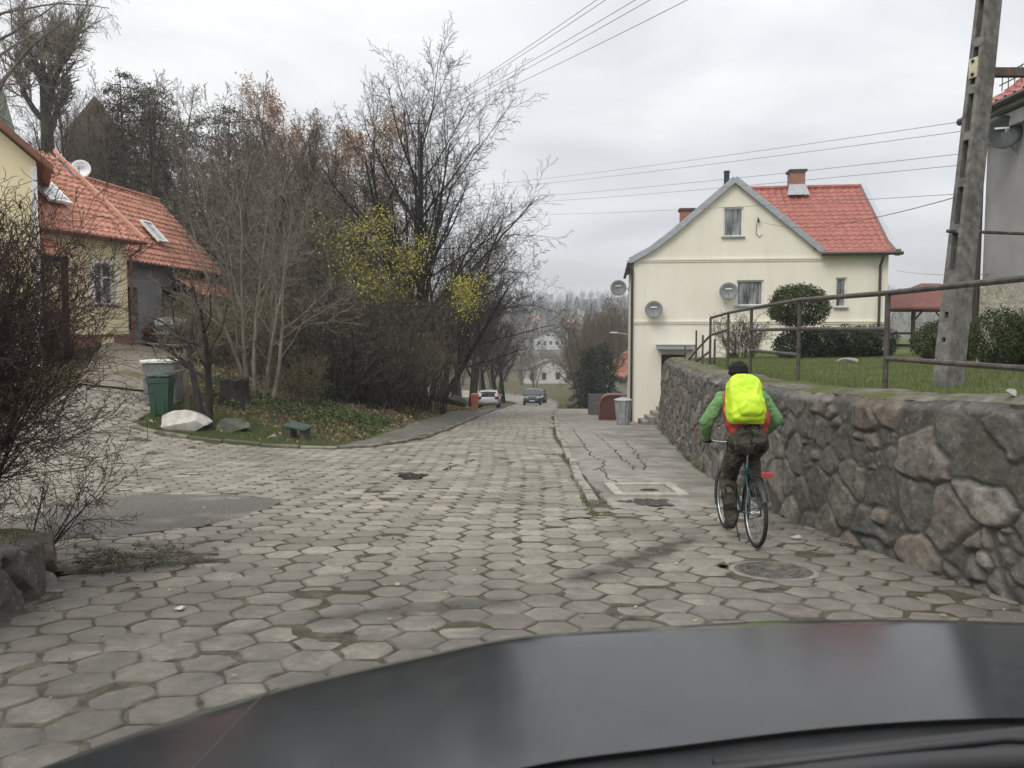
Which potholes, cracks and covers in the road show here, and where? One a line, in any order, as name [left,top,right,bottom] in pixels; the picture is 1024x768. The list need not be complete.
crack [558,418,657,483]
manhole cover [729,561,819,583]
manhole cover [604,483,690,497]
